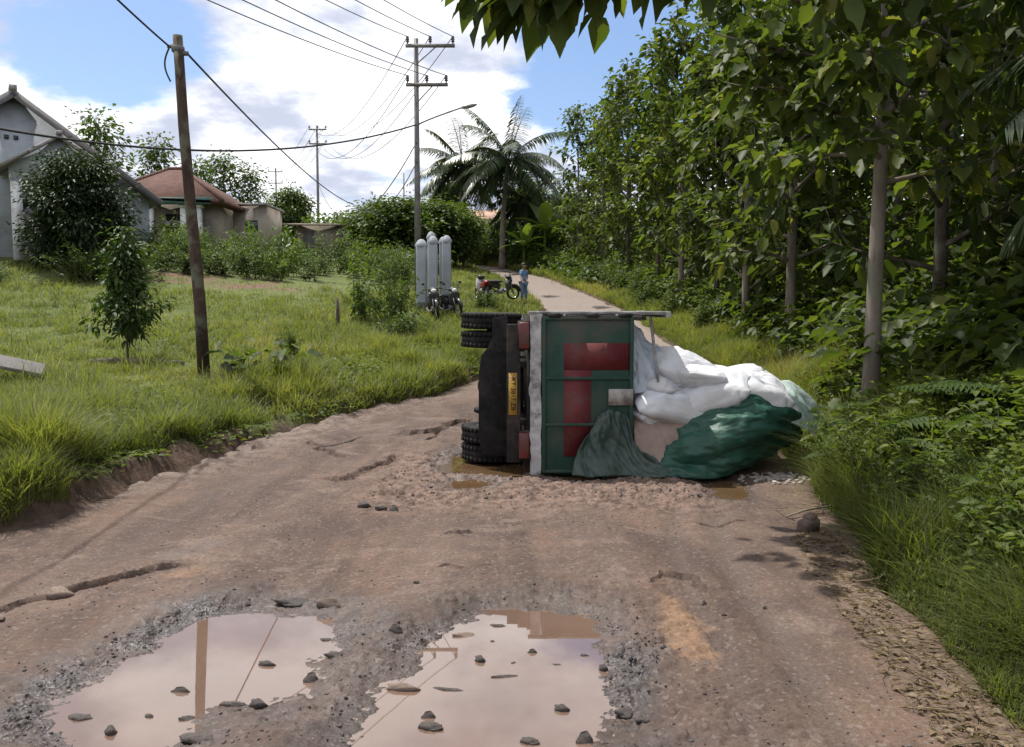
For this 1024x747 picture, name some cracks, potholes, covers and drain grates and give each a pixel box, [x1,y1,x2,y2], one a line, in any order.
pothole [435,475,503,491]
pothole [317,595,644,747]
pothole [696,477,759,501]
pothole [3,595,377,747]
pothole [428,446,530,479]
crack [305,419,474,497]
crack [0,562,194,613]
